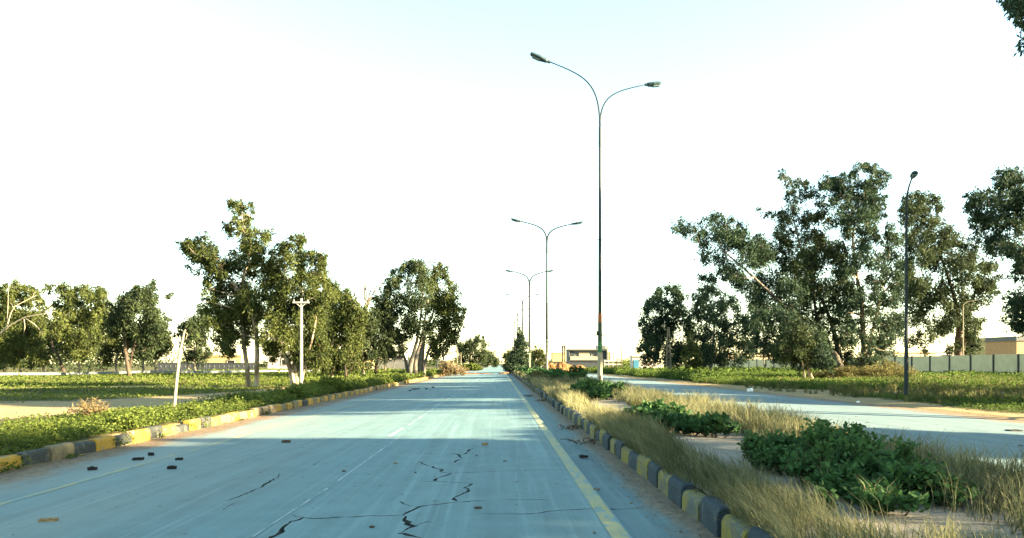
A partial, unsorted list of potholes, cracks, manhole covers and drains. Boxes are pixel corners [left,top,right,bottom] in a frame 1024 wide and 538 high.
crack [268,448,634,538]
